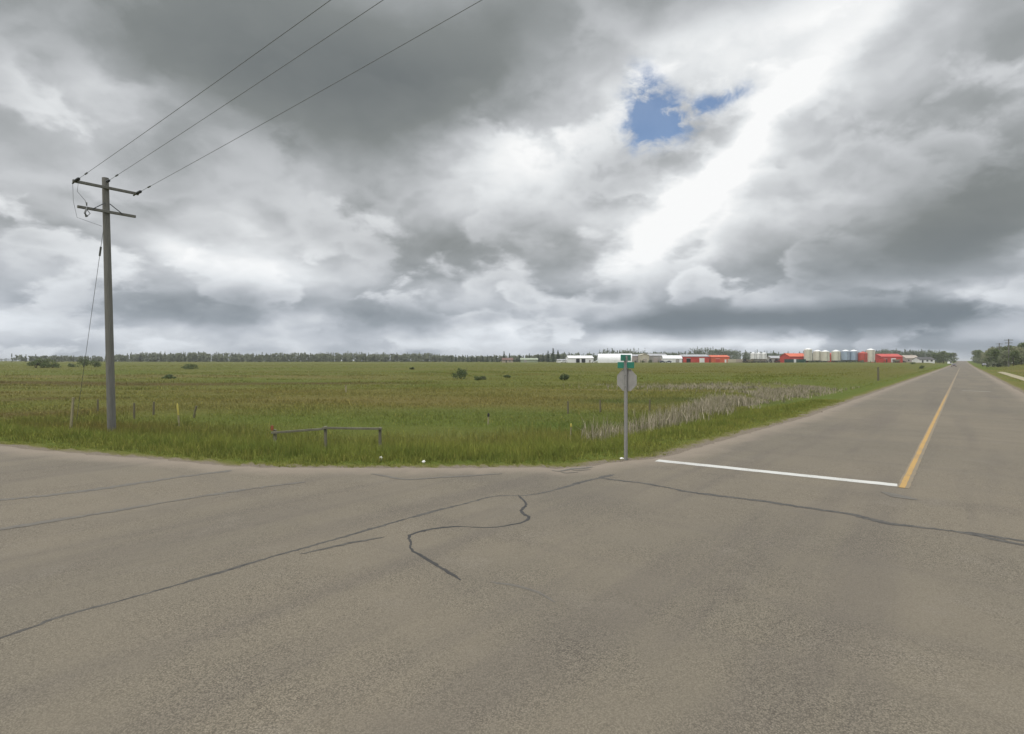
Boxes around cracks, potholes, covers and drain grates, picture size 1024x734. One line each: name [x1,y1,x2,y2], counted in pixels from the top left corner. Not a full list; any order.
crack [0,467,1024,639]
